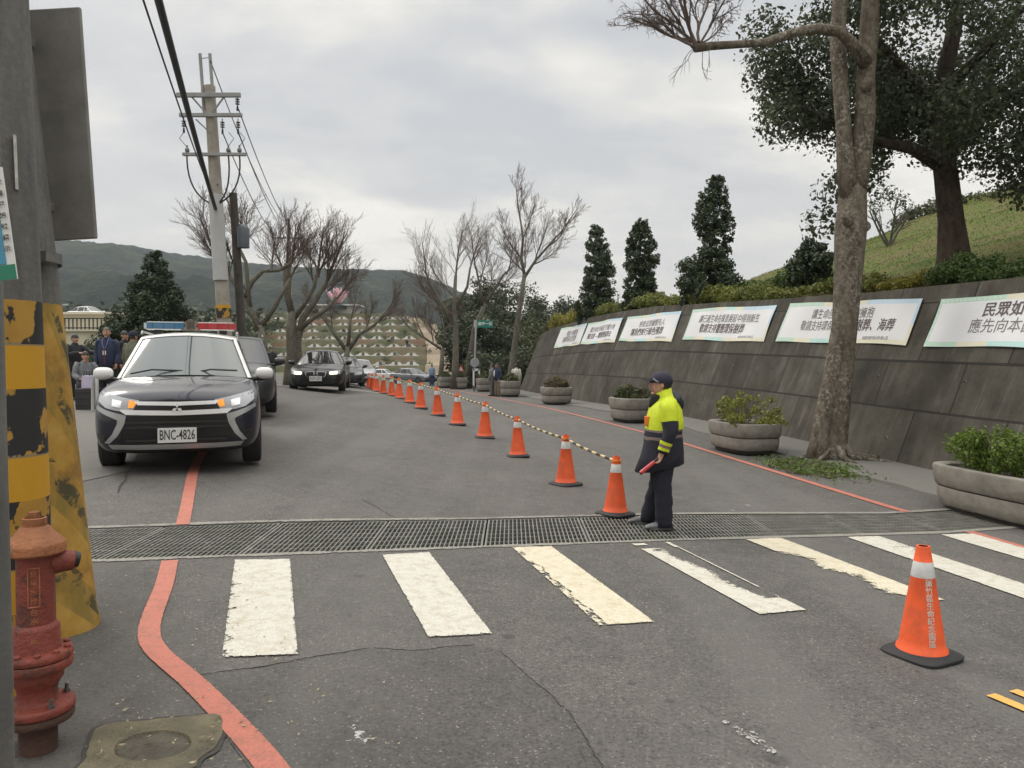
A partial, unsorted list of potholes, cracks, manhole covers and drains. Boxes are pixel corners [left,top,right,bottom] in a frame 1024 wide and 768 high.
drain grate [242,521,388,554]
drain grate [898,511,1008,531]
drain grate [89,527,164,560]
drain grate [825,514,939,533]
drain grate [103,523,280,559]
drain grate [485,518,588,546]
drain grate [369,520,487,549]
manhole cover [74,713,227,768]
drain grate [672,515,777,539]
drain grate [746,515,861,536]
drain grate [580,516,686,542]
